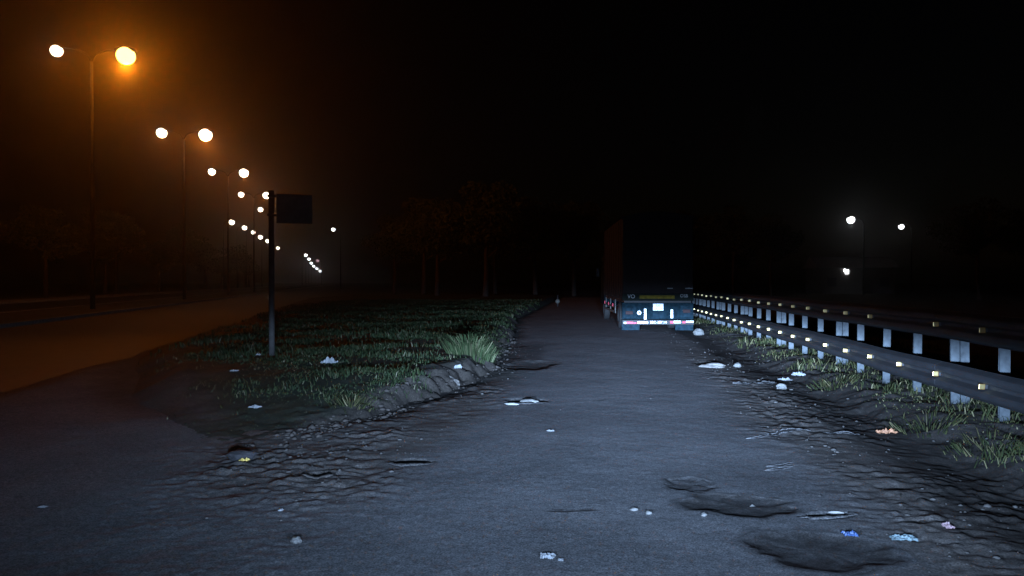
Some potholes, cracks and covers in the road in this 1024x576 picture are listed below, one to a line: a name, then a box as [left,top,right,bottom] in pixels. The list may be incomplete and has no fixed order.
pothole [385,458,438,467]
pothole [671,491,807,520]
pothole [498,360,562,371]
pothole [660,476,721,494]
pothole [730,529,919,576]
pothole [796,511,858,520]
